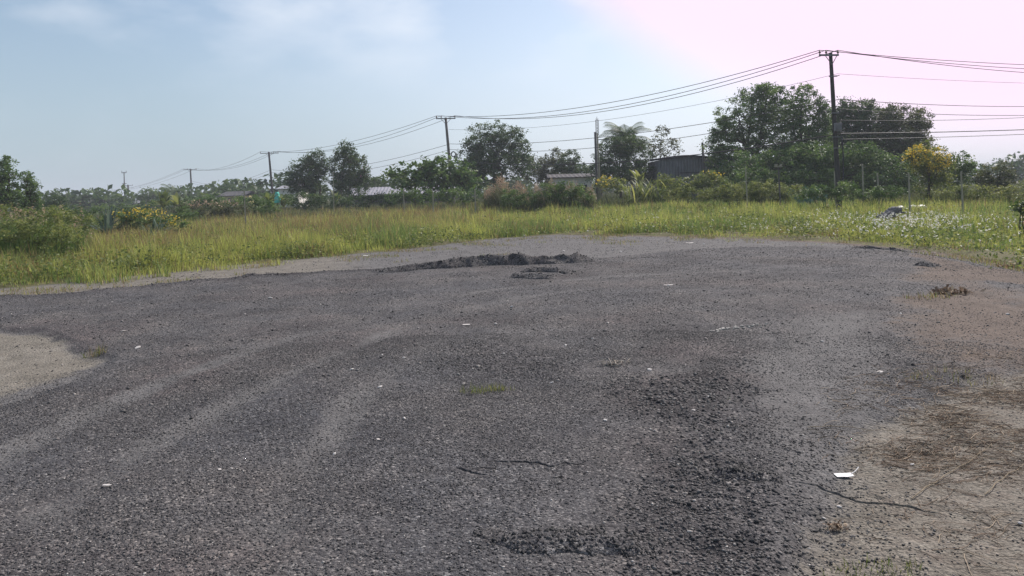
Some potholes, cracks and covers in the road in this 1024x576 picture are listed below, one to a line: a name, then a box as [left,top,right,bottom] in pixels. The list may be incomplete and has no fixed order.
crack [445,460,587,479]
crack [787,479,942,518]
